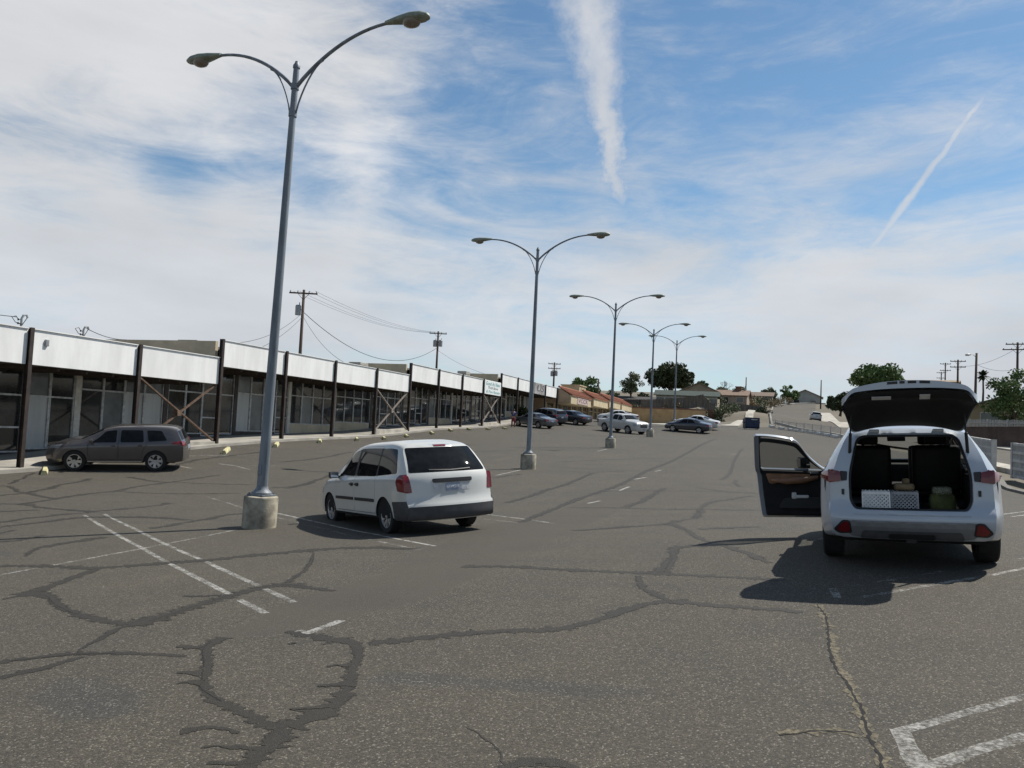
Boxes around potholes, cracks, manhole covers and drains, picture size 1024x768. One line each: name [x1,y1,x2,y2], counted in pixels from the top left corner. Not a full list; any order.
crack [776,604,892,768]
crack [466,727,580,768]
